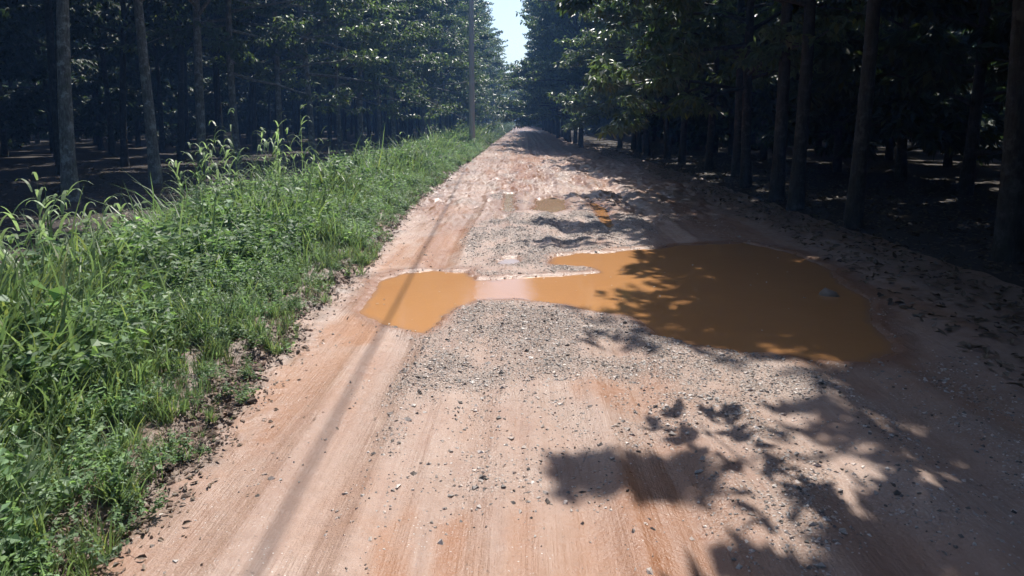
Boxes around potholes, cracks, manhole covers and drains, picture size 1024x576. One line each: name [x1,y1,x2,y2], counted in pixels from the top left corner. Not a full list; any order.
pothole [346,239,915,367]
pothole [526,194,574,214]
pothole [584,199,621,230]
